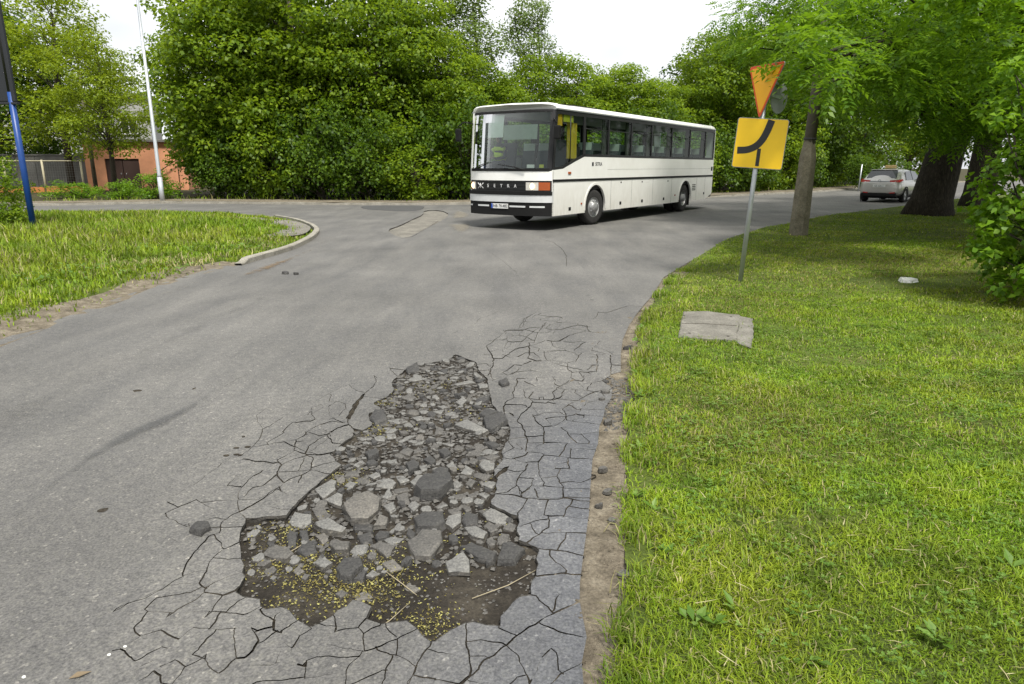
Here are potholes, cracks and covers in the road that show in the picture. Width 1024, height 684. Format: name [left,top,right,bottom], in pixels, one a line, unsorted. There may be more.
crack [473,306,627,577]
pothole [232,354,539,654]
crack [115,369,583,684]
